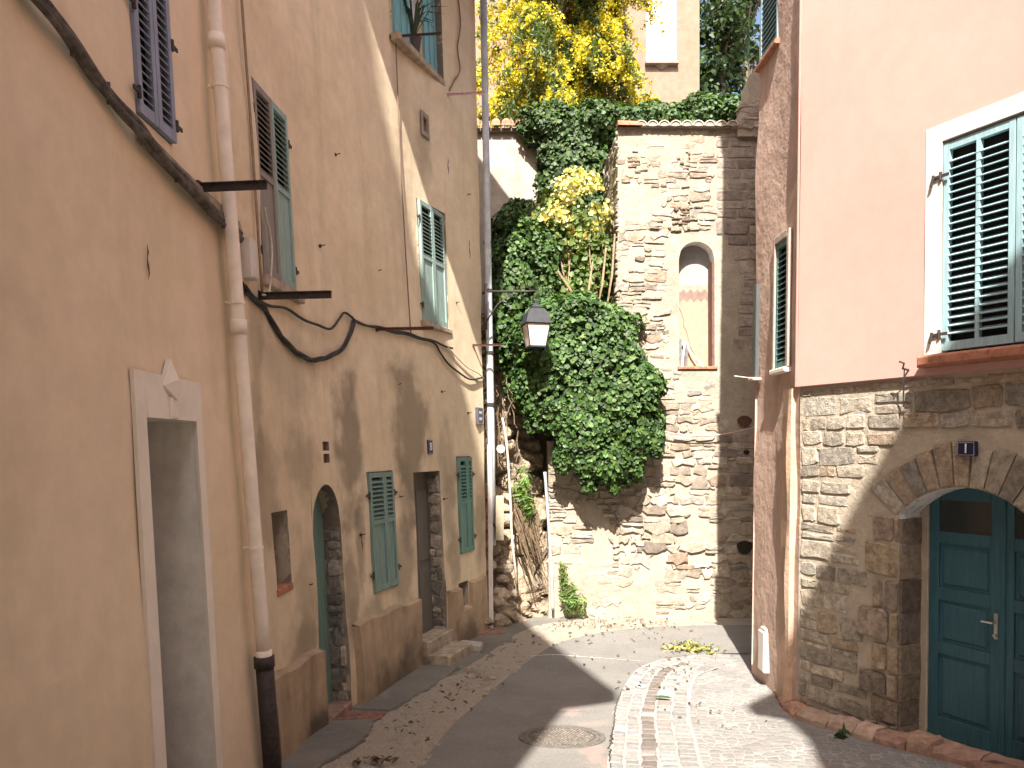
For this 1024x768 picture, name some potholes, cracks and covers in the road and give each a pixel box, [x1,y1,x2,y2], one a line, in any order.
manhole cover [519,725,606,749]
